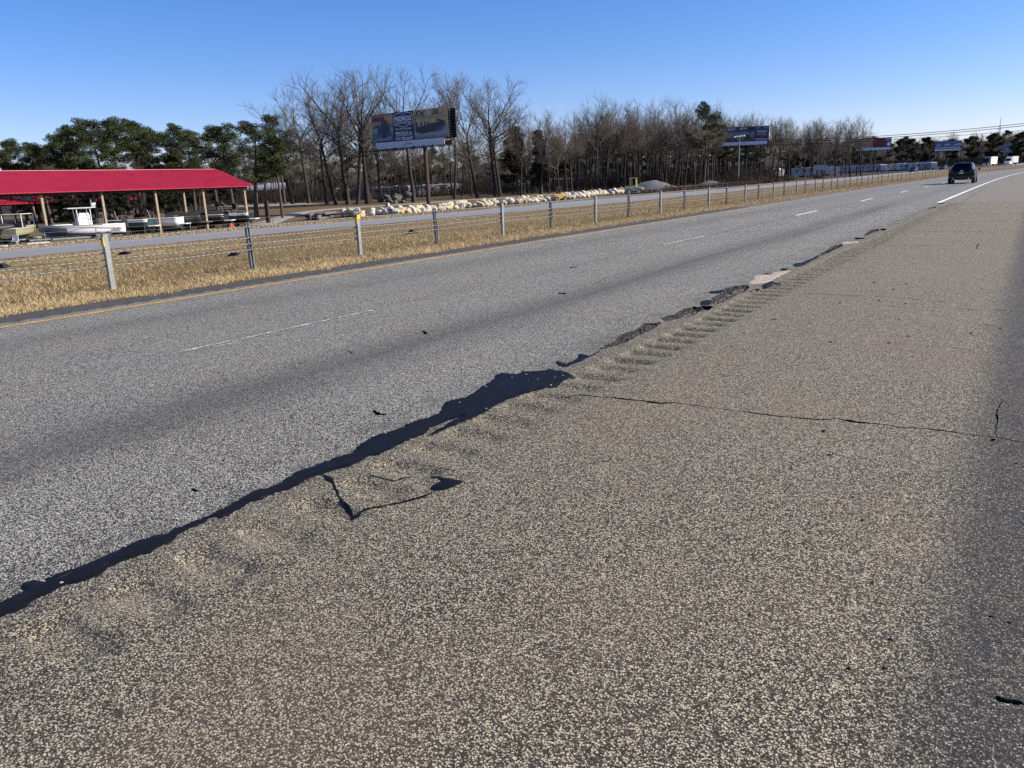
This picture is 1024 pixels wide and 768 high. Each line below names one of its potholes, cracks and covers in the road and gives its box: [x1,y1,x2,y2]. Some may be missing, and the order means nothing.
pothole [711,285,750,305]
pothole [661,307,702,322]
crack [558,395,1024,443]
